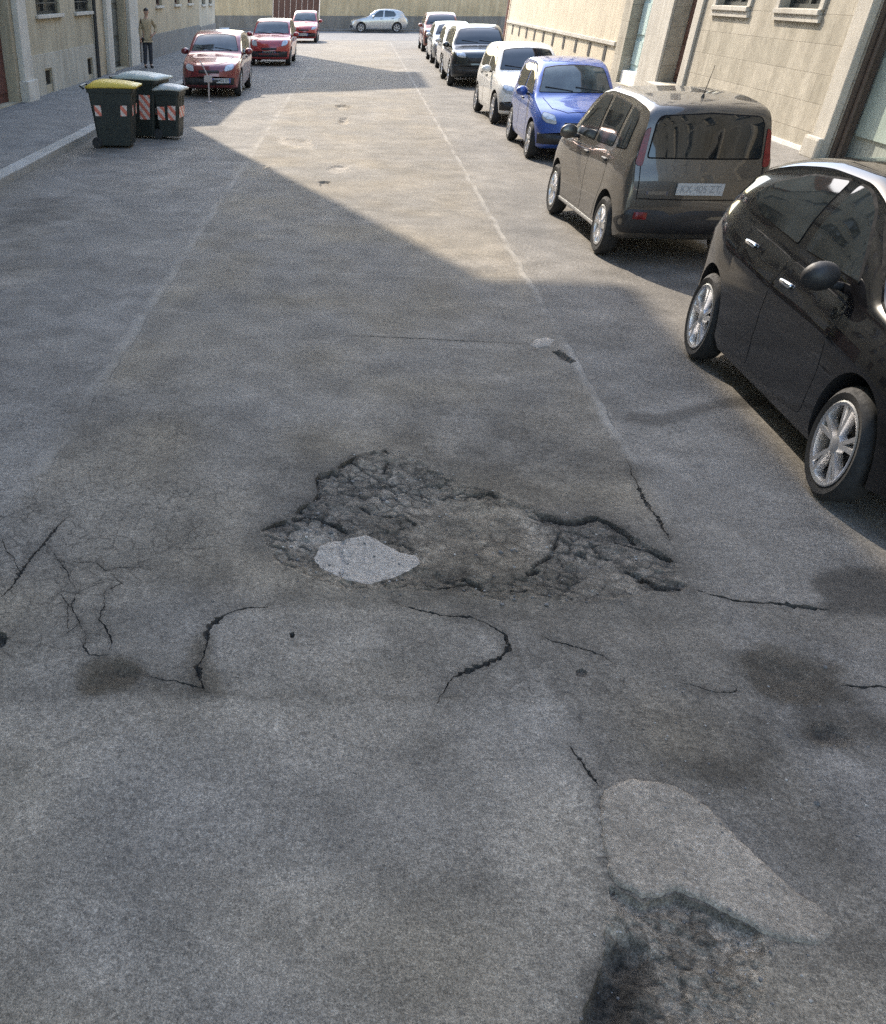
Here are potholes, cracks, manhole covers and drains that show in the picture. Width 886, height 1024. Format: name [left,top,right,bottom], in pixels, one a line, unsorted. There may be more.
crack [697,590,829,611]
crack [149,606,268,689]
crack [542,636,608,660]
pothole [579,884,771,1024]
crack [0,515,156,656]
crack [395,602,512,703]
pothole [260,449,690,603]
pothole [552,350,576,364]
pothole [324,165,350,174]
crack [570,746,599,786]
crack [626,460,670,542]
